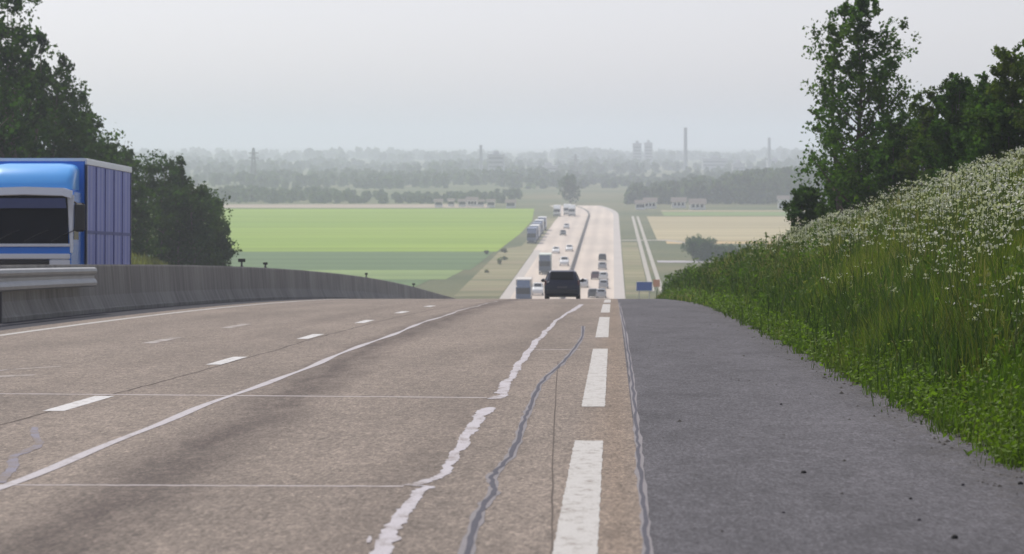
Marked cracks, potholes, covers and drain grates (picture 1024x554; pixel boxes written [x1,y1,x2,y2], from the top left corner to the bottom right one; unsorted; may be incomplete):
crack [545,349,581,554]
